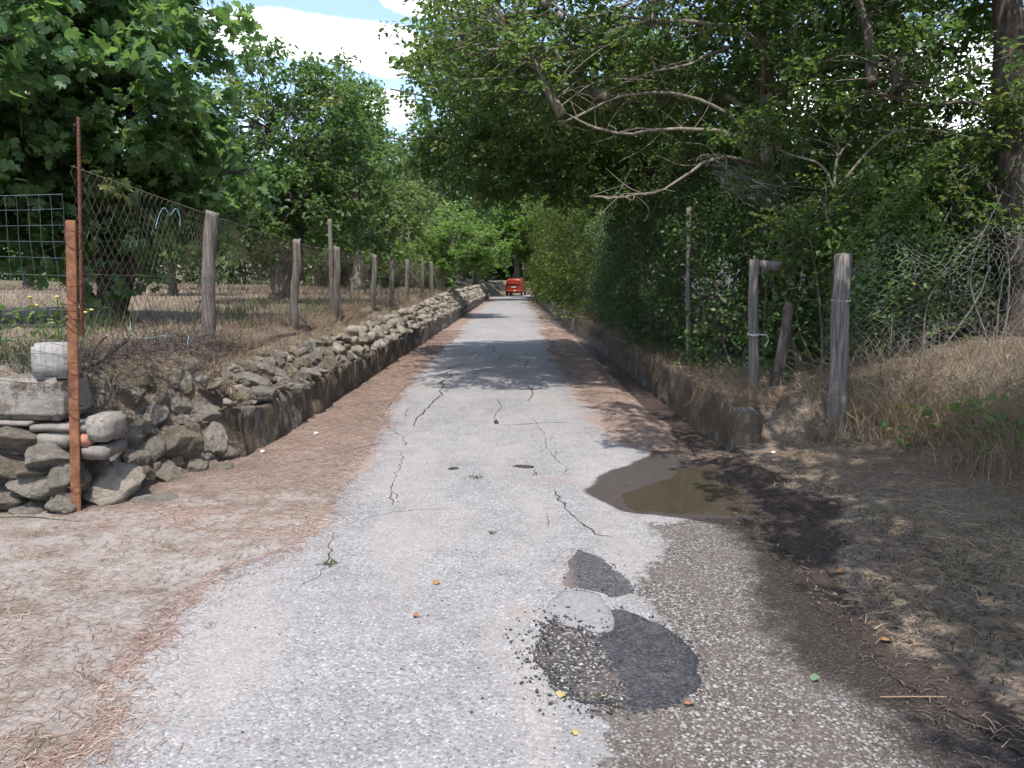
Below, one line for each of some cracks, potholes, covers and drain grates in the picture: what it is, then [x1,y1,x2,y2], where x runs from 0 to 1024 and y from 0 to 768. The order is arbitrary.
crack [354,347,527,523]
crack [494,399,570,476]
crack [547,490,610,537]
crack [300,531,334,586]
